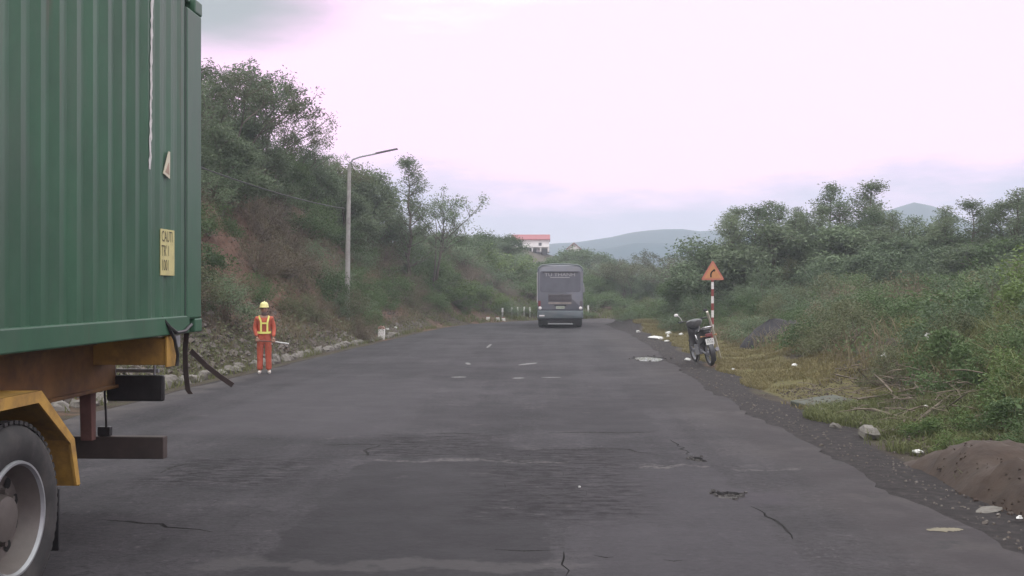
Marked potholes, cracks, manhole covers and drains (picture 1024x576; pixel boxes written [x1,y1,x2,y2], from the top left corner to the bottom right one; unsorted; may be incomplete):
crack [495,549,570,576]
crack [496,432,691,512]
crack [339,433,479,457]
crack [751,506,793,539]
pothole [709,489,748,500]
crack [110,520,211,532]
